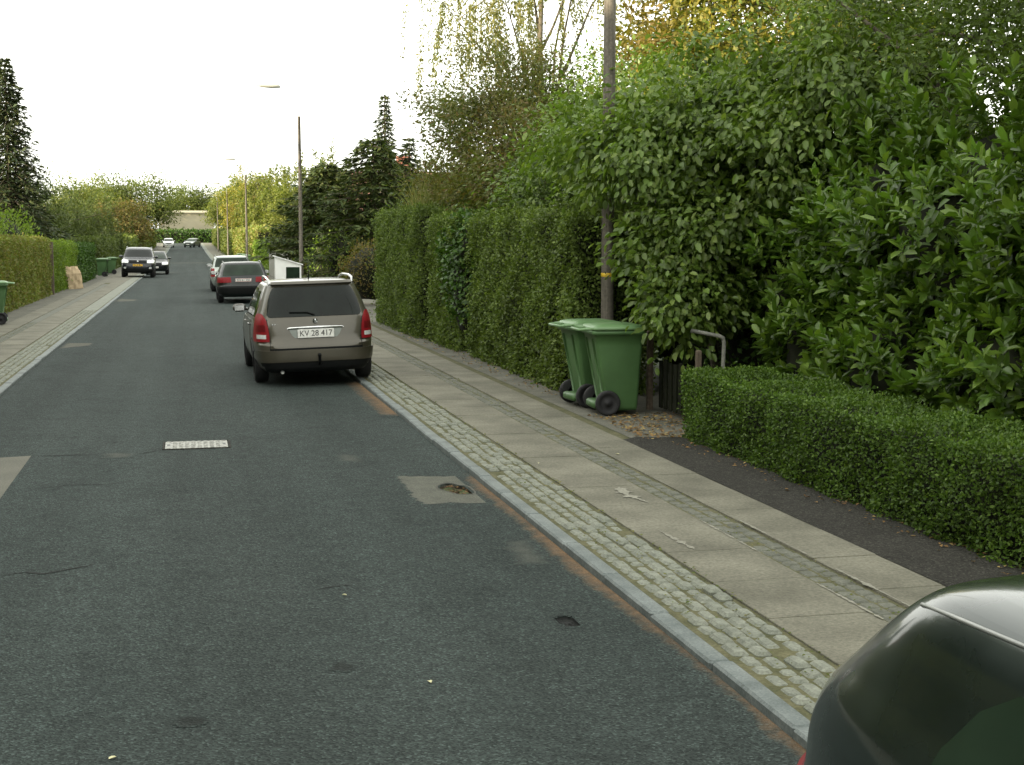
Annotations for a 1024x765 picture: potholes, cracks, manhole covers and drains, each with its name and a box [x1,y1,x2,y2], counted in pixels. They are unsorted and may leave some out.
crack [6,564,91,575]
pothole [174,715,210,728]
pothole [549,614,586,628]
